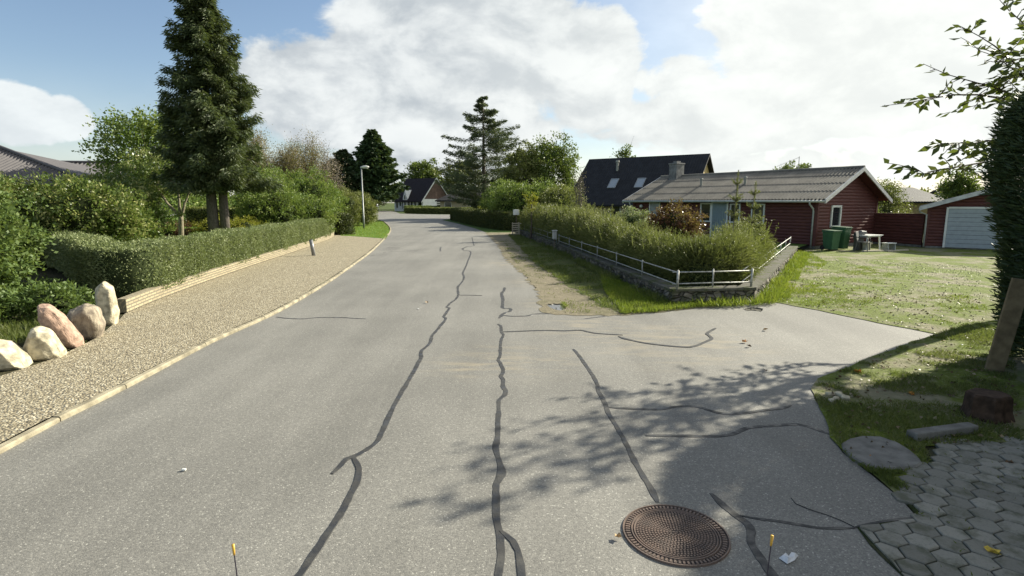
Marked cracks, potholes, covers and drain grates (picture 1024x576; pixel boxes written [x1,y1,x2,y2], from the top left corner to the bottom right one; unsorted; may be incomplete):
manhole cover [622,504,731,568]
